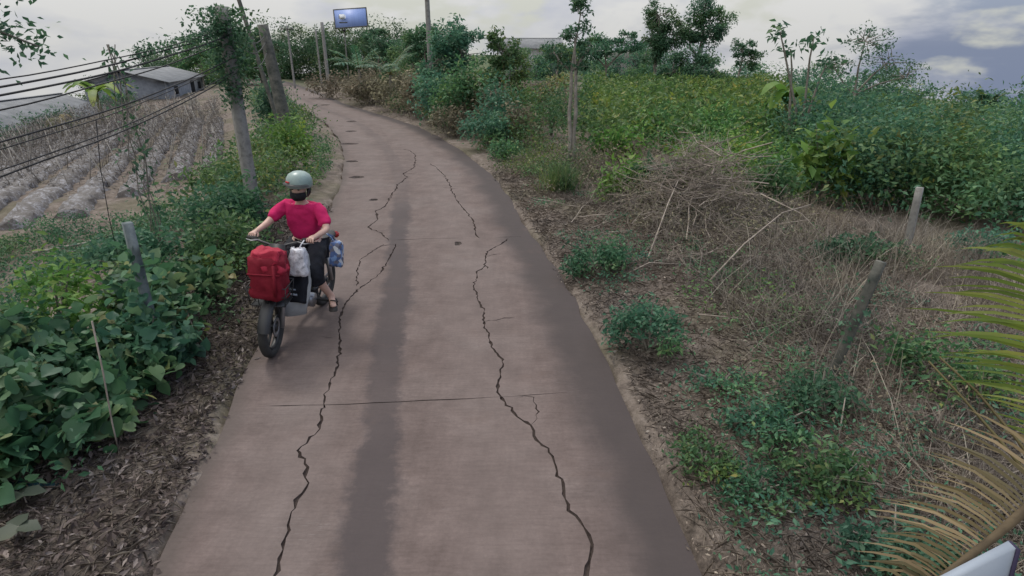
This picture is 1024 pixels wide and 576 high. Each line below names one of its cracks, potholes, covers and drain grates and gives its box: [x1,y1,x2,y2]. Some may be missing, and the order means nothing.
crack [274,149,593,576]
